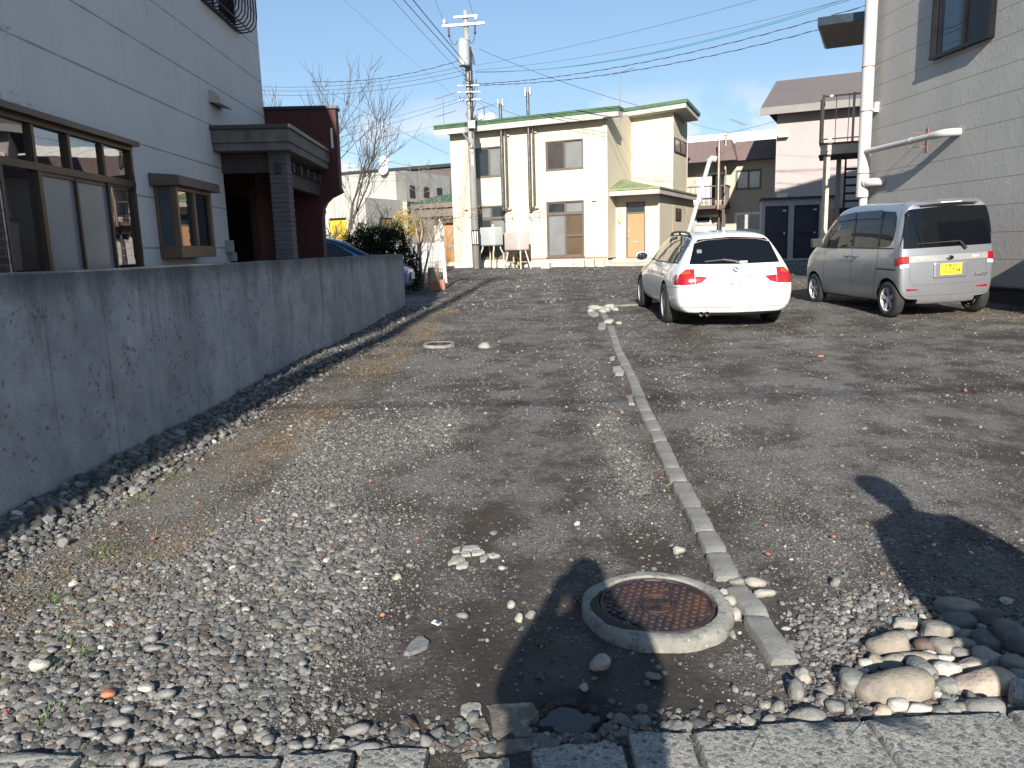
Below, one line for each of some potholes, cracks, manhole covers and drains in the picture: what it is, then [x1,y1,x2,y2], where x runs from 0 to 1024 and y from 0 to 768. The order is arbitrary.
pothole [532,695,609,735]
manhole cover [581,571,735,653]
